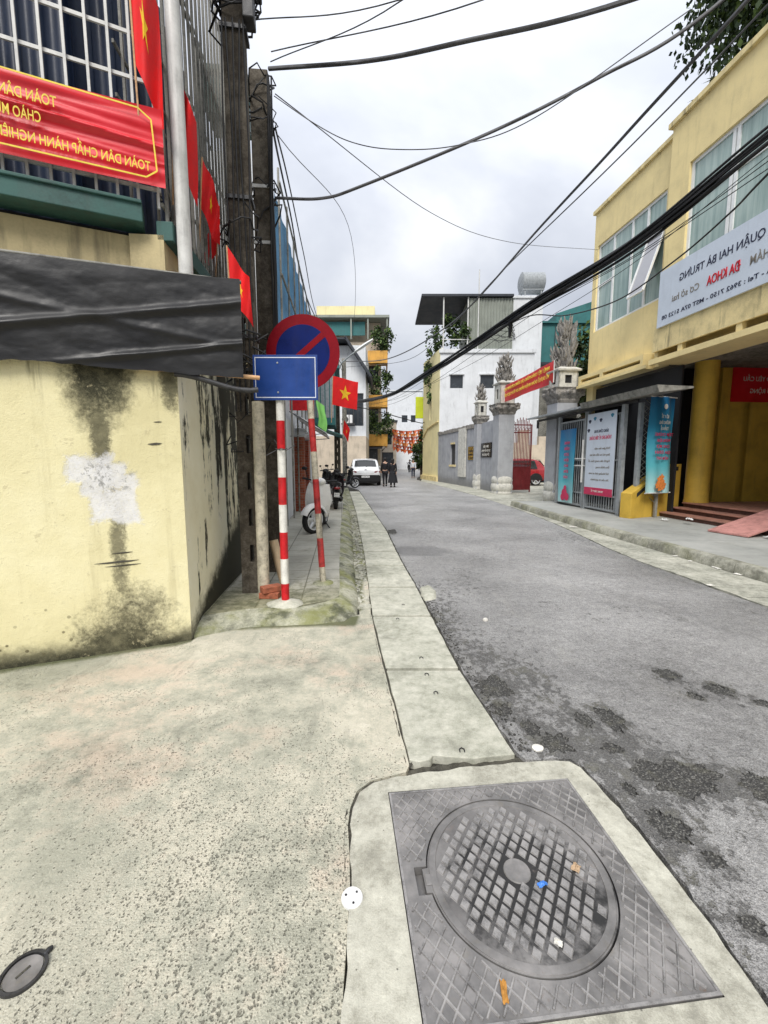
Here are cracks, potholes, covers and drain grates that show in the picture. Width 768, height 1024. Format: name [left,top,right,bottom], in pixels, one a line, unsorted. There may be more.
manhole cover [389,778,723,1024]
utility cover [0,945,54,999]
